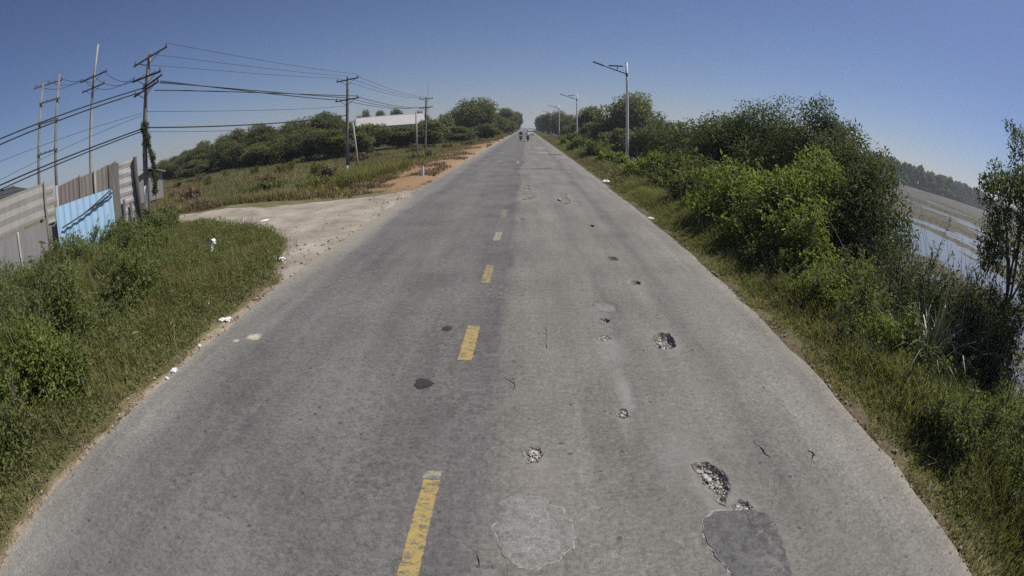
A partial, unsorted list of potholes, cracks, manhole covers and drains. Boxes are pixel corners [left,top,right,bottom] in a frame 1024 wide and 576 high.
pothole [615,408,632,419]
pothole [556,192,571,205]
pothole [732,499,754,511]
pothole [521,447,545,464]
pothole [691,461,733,507]
pothole [650,332,676,350]
